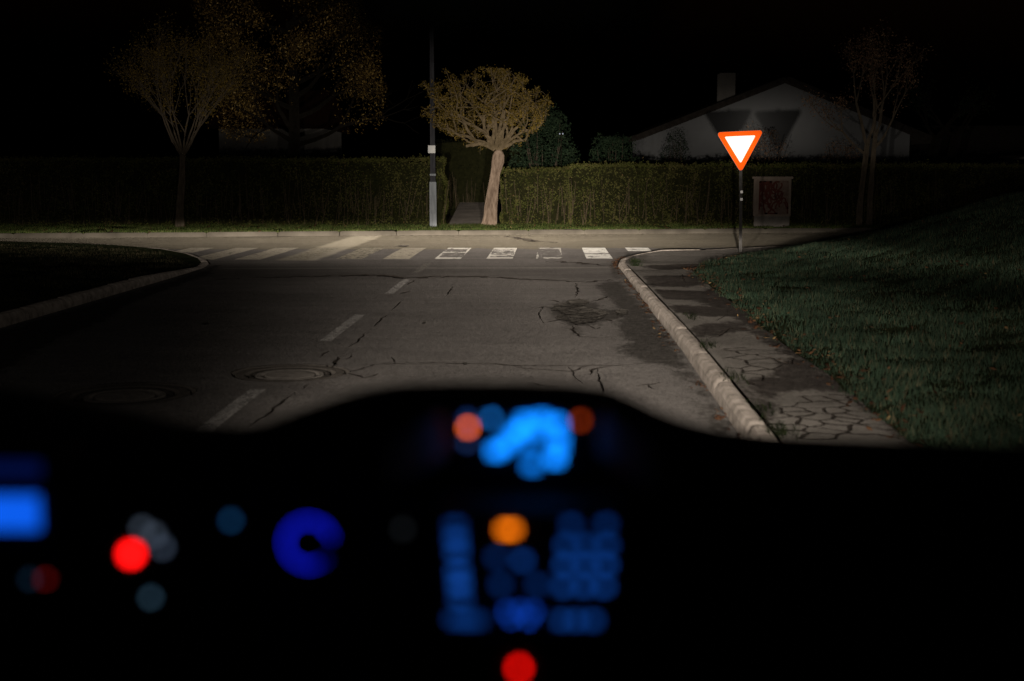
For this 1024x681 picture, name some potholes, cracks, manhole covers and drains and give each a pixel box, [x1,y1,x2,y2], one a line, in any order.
manhole cover [231,364,349,382]
crack [217,274,668,425]
manhole cover [54,383,197,406]
